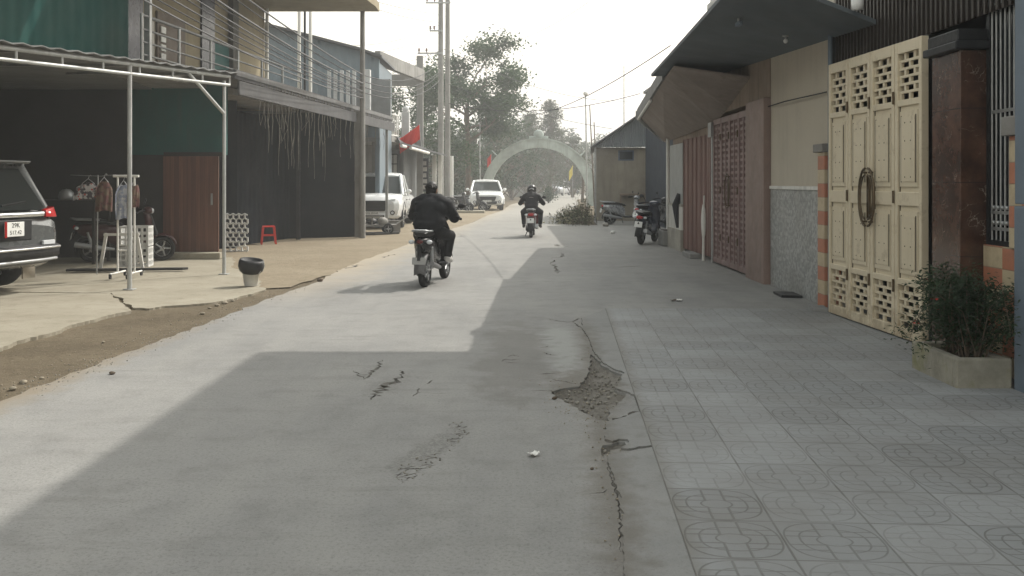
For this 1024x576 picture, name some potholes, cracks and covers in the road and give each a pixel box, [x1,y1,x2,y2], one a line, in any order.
crack [397,421,470,482]
crack [589,464,622,552]
pothole [551,355,626,421]
crack [345,360,442,400]
